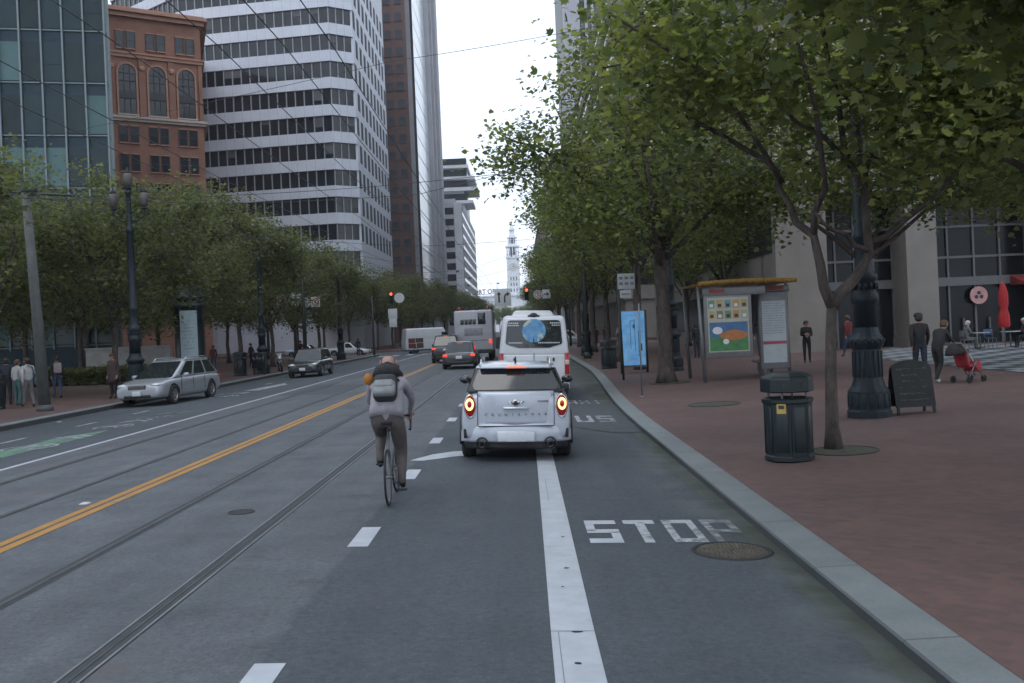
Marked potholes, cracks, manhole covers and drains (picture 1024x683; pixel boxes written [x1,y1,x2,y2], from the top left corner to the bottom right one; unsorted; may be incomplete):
manhole cover [691,541,774,561]
